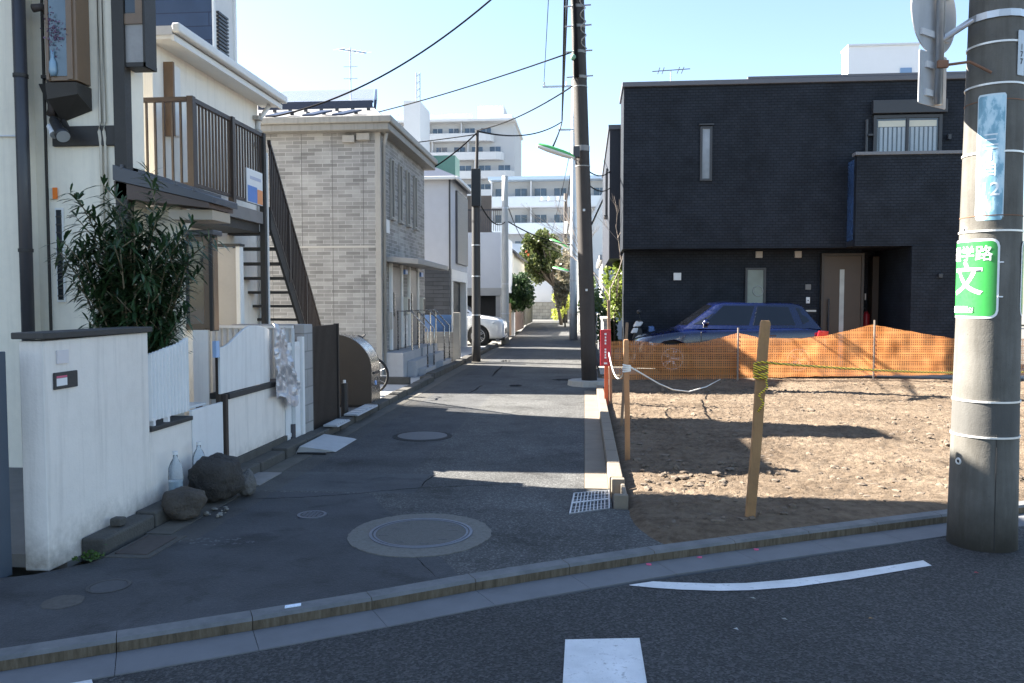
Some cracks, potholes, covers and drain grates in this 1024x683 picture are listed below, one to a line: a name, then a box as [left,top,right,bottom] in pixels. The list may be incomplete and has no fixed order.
utility cover [86,579,131,594]
utility cover [297,510,327,519]
manhole cover [347,513,492,558]
drain grate [569,490,610,514]
utility cover [40,595,85,610]
manhole cover [392,431,452,442]
